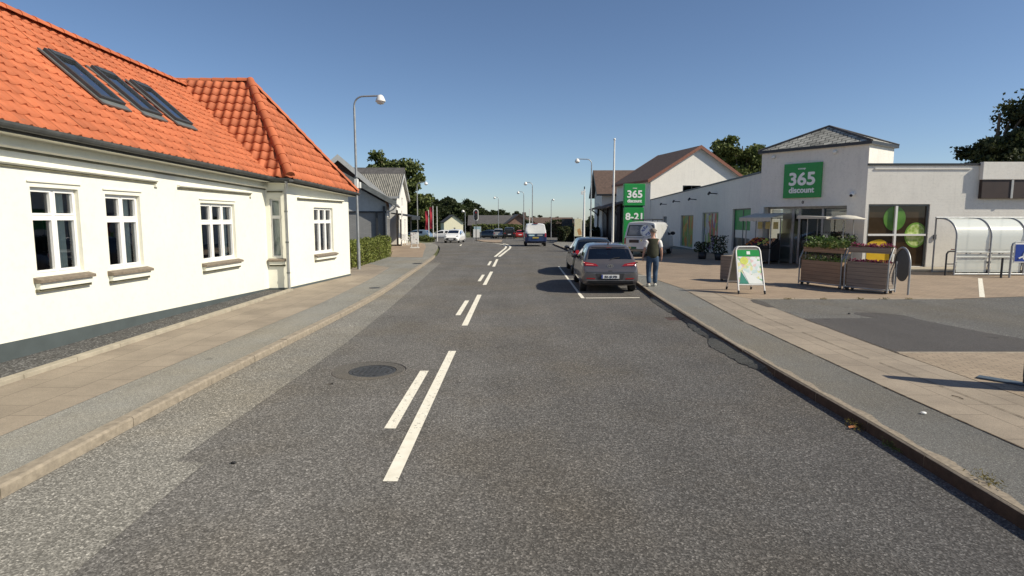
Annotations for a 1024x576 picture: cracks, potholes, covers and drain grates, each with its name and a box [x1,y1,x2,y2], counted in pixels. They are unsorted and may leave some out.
manhole cover [330,361,406,380]
